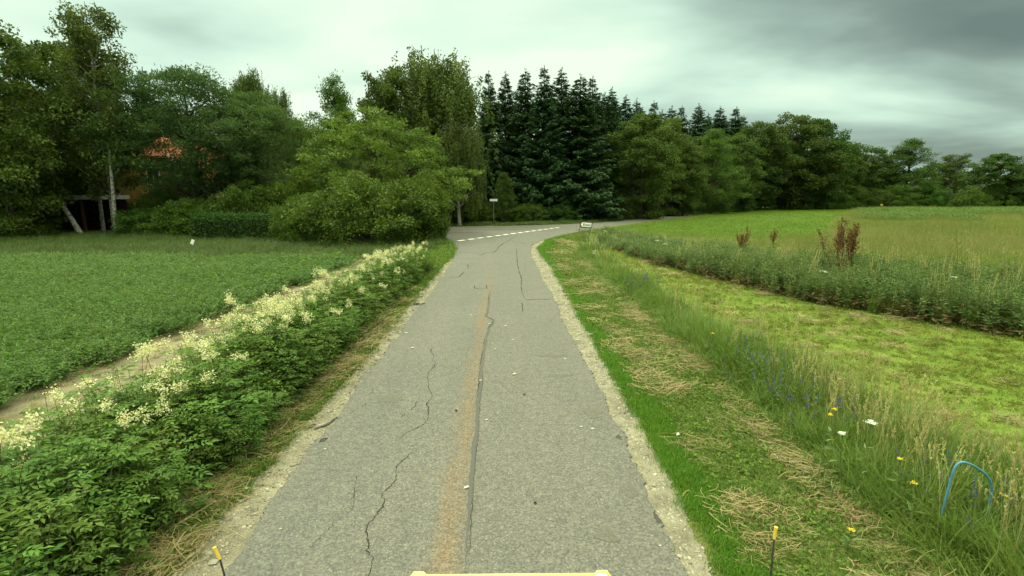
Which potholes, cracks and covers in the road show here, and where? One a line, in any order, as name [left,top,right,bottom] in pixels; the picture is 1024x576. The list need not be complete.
crack [451,239,532,574]
crack [298,346,436,576]
